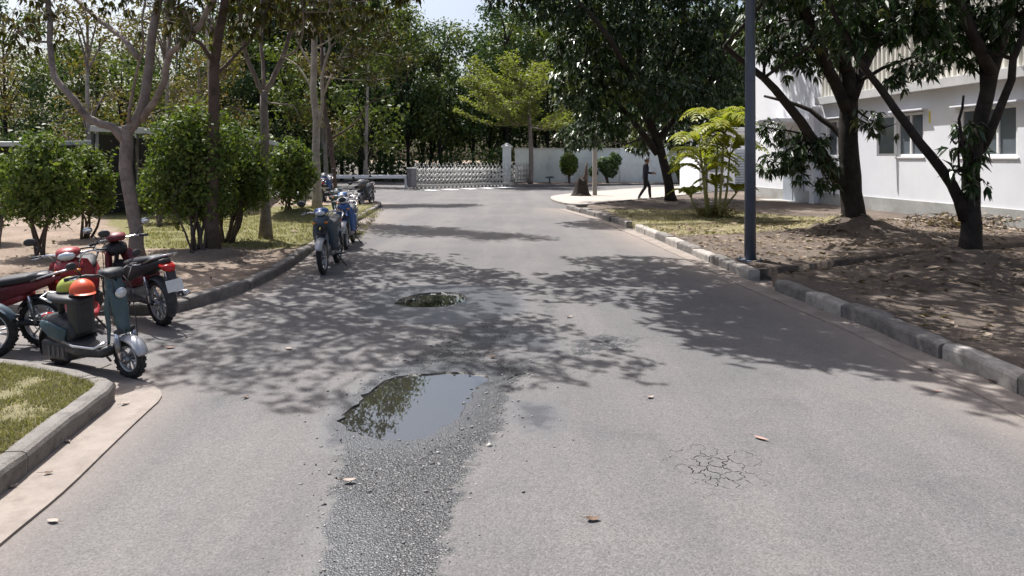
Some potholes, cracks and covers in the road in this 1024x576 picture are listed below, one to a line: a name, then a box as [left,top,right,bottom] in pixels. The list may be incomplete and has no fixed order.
pothole [394,292,468,307]
crack [660,444,771,498]
pothole [337,371,489,441]
